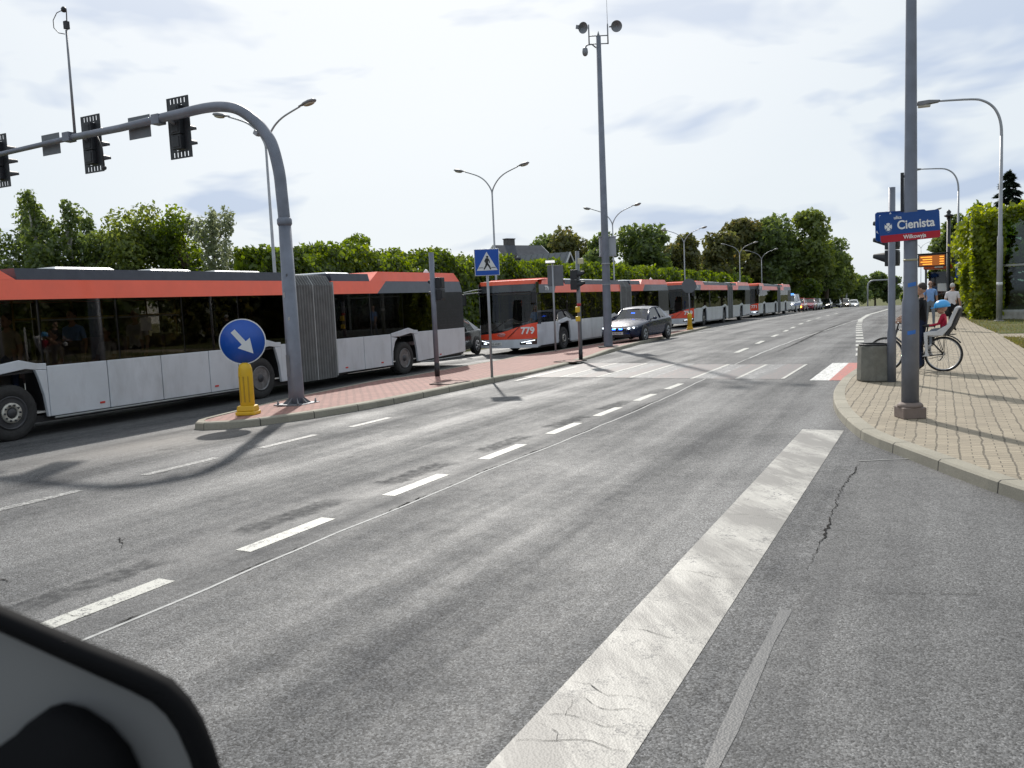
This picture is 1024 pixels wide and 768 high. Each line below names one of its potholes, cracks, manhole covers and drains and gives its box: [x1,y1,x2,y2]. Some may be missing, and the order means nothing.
crack [520,681,647,752]
crack [806,463,860,570]
